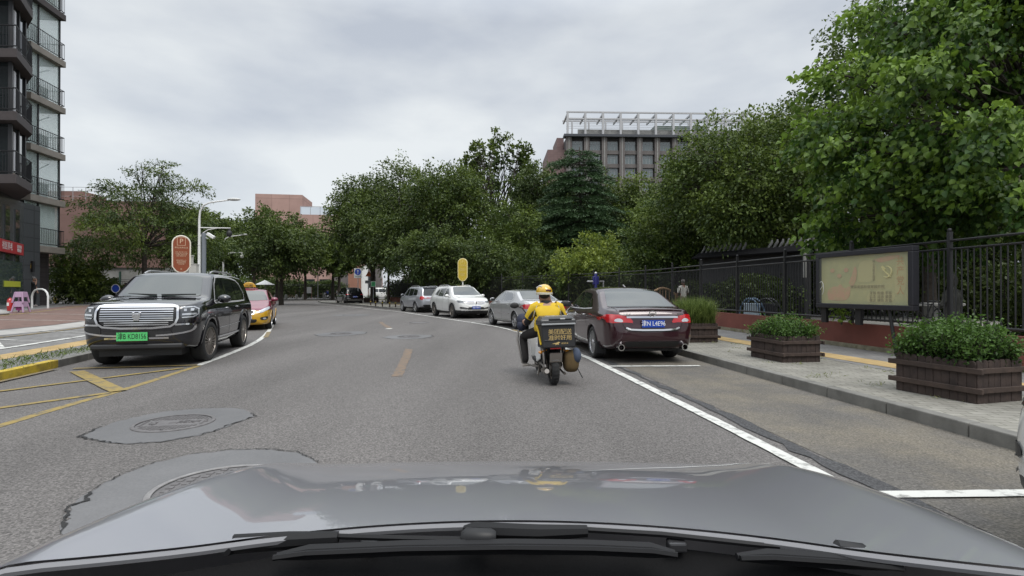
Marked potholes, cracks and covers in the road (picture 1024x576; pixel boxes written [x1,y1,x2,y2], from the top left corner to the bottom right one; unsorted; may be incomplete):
manhole cover [143,464,264,501]
manhole cover [130,414,216,433]
